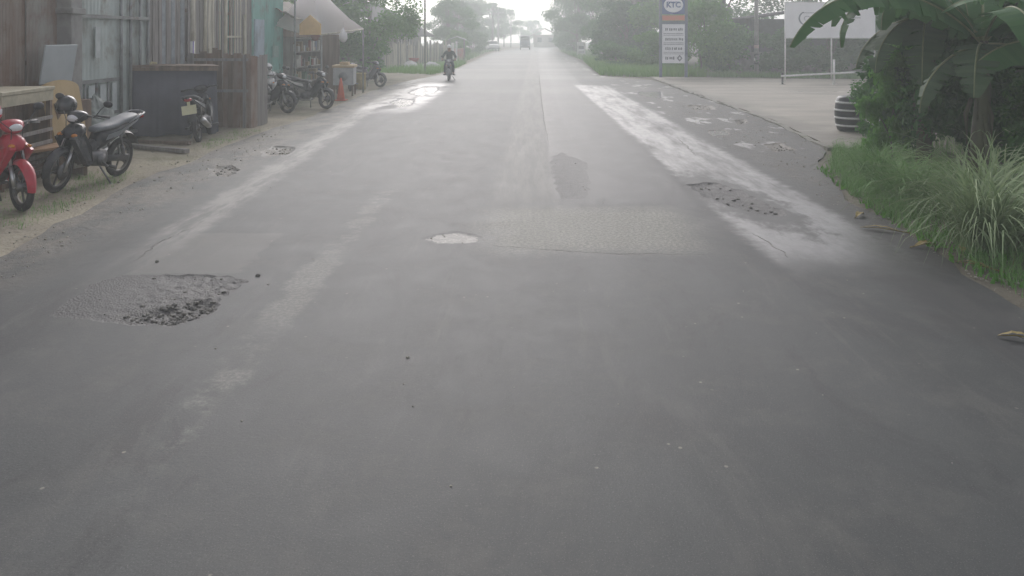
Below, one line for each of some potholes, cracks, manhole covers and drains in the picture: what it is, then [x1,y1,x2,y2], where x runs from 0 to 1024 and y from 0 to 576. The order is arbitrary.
pothole [763,143,796,152]
pothole [49,274,249,327]
pothole [259,146,296,157]
pothole [206,165,240,177]
pothole [420,231,486,244]
pothole [408,86,440,97]
pothole [686,182,787,217]
